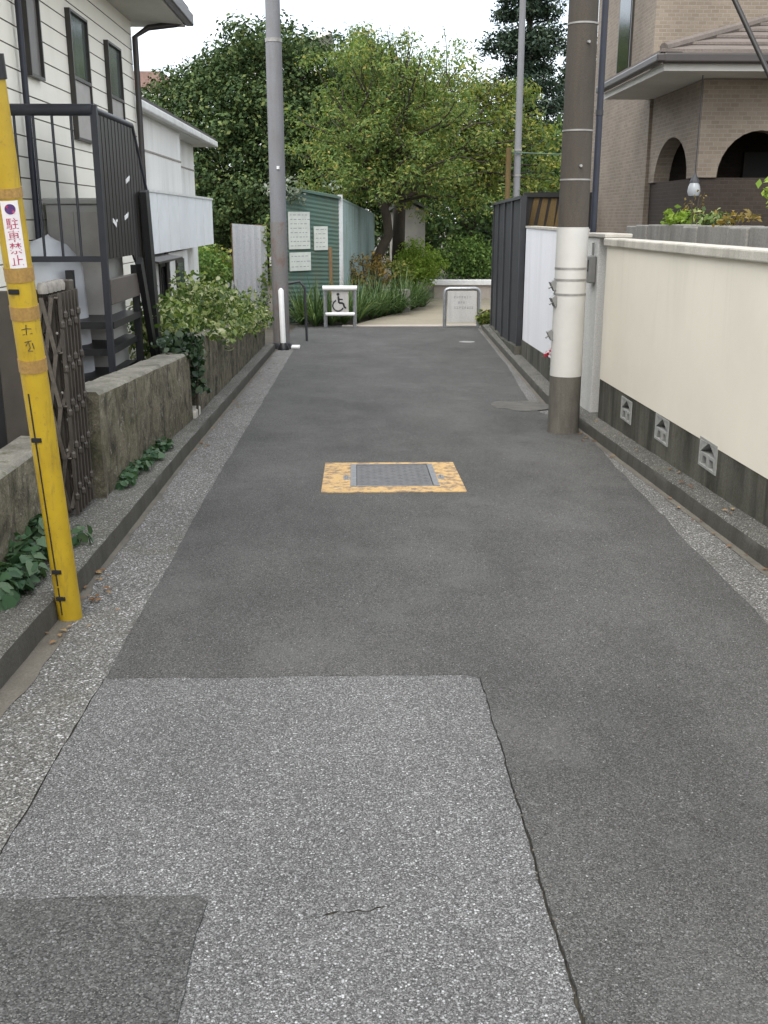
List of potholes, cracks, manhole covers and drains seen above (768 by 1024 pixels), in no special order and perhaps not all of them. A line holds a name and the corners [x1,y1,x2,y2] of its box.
manhole cover [321,462,467,493]
crack [322,906,394,917]
